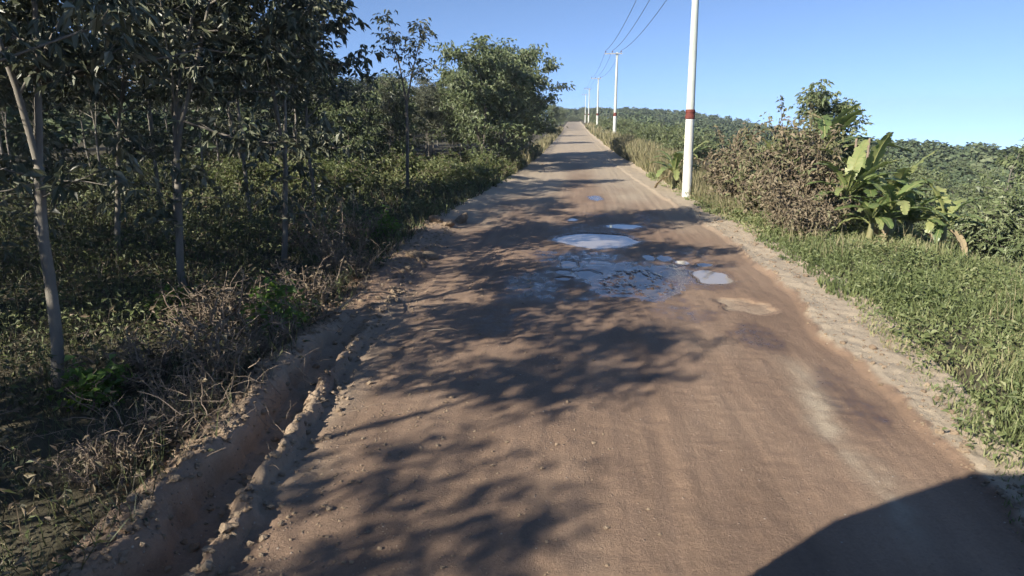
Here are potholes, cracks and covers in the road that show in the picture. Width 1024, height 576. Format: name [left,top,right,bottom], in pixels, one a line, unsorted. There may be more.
pothole [545,231,647,251]
pothole [689,269,736,285]
pothole [560,260,579,269]
pothole [708,295,782,316]
pothole [586,266,686,303]
pothole [574,270,602,280]
